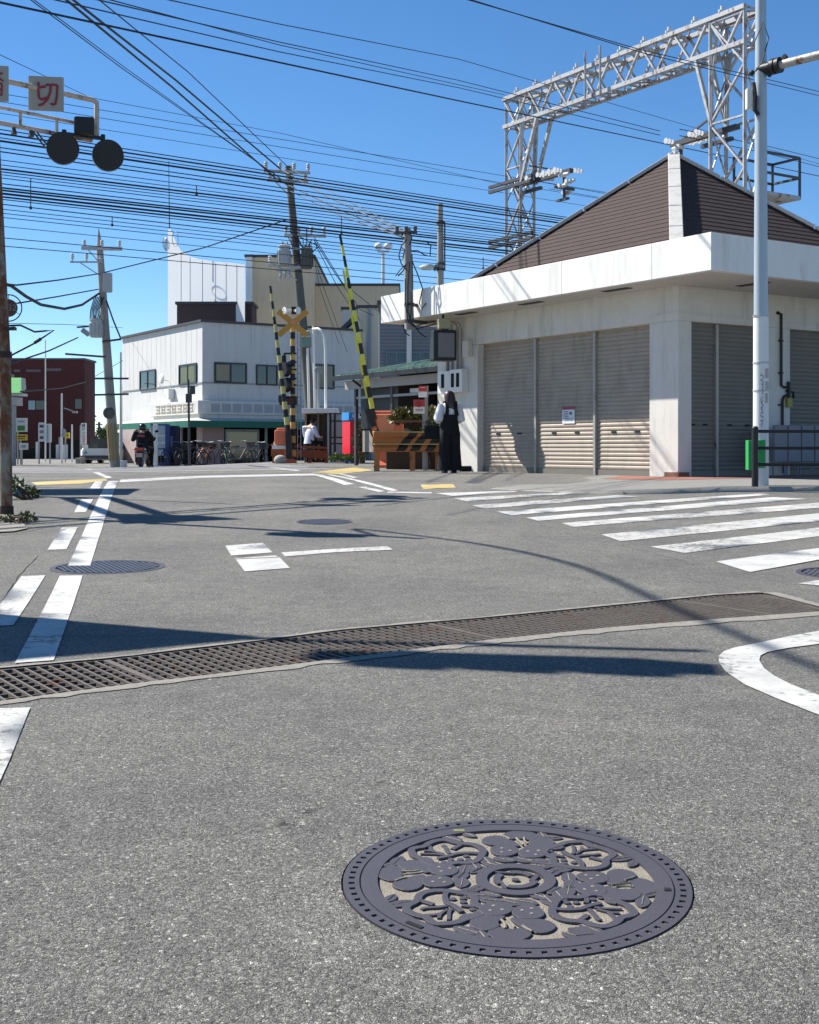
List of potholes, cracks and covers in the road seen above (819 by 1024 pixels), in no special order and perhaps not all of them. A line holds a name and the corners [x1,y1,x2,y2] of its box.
manhole cover [343,819,693,959]
manhole cover [49,560,166,574]
manhole cover [795,567,819,577]
drain grate [0,591,819,705]
